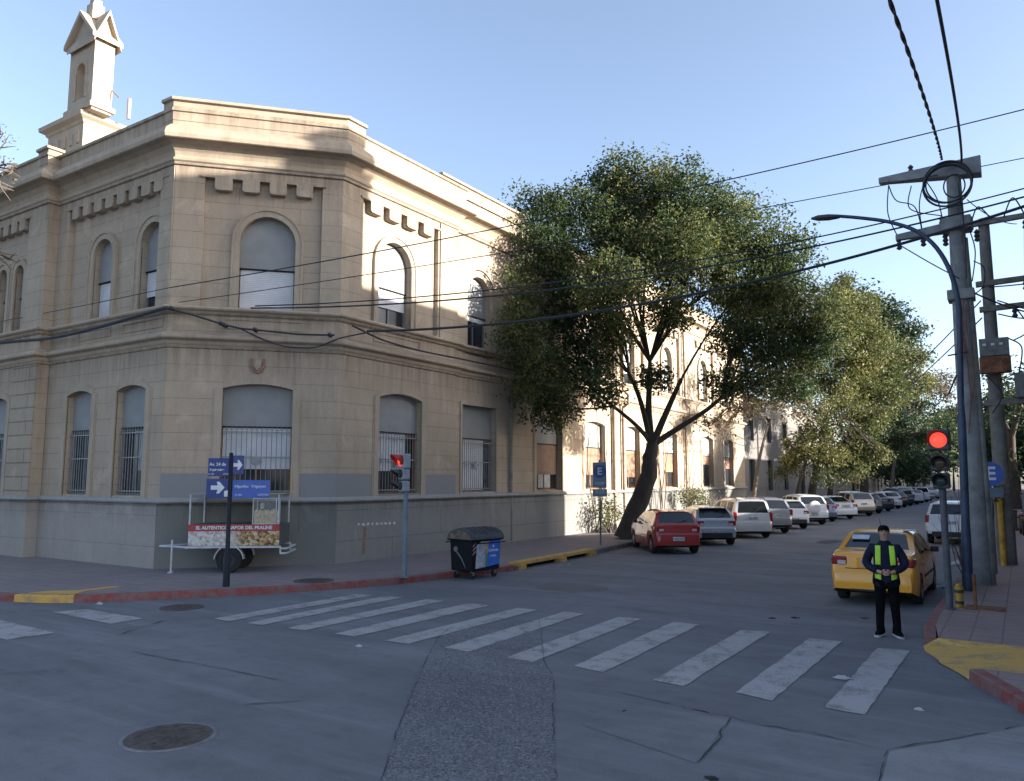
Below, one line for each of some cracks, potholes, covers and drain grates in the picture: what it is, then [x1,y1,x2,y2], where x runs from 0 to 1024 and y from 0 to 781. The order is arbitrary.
manhole cover [118,722,217,753]
